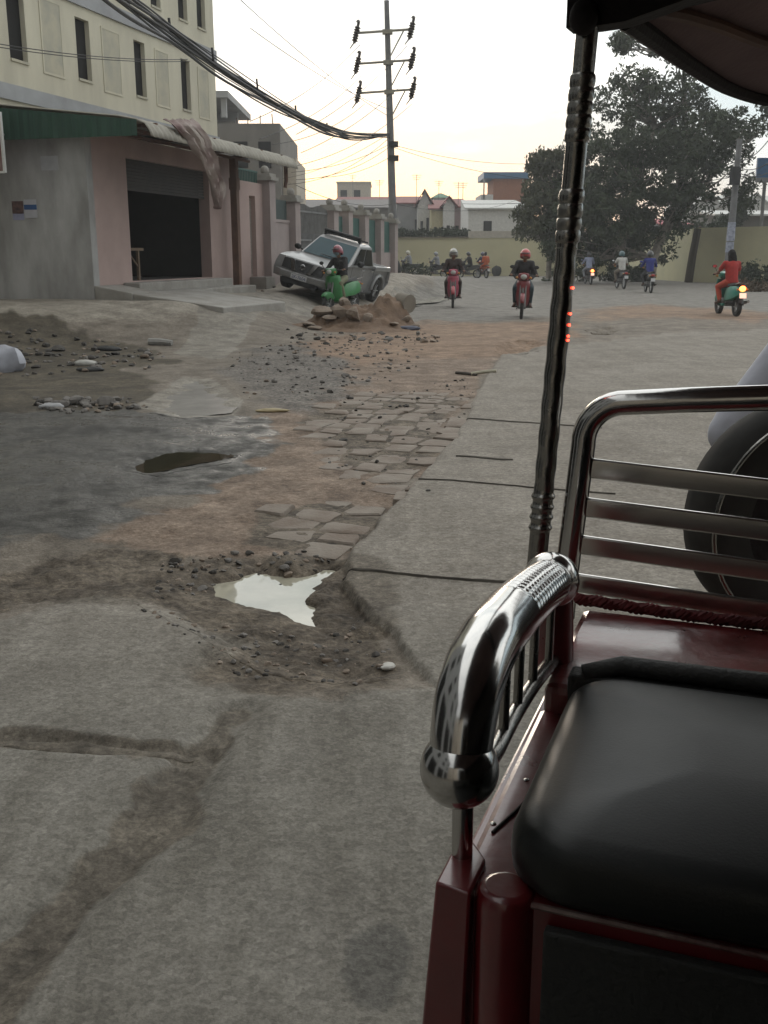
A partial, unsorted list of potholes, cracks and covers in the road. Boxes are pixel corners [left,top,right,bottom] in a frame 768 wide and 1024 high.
pothole [124,446,241,477]
pothole [137,557,401,685]
